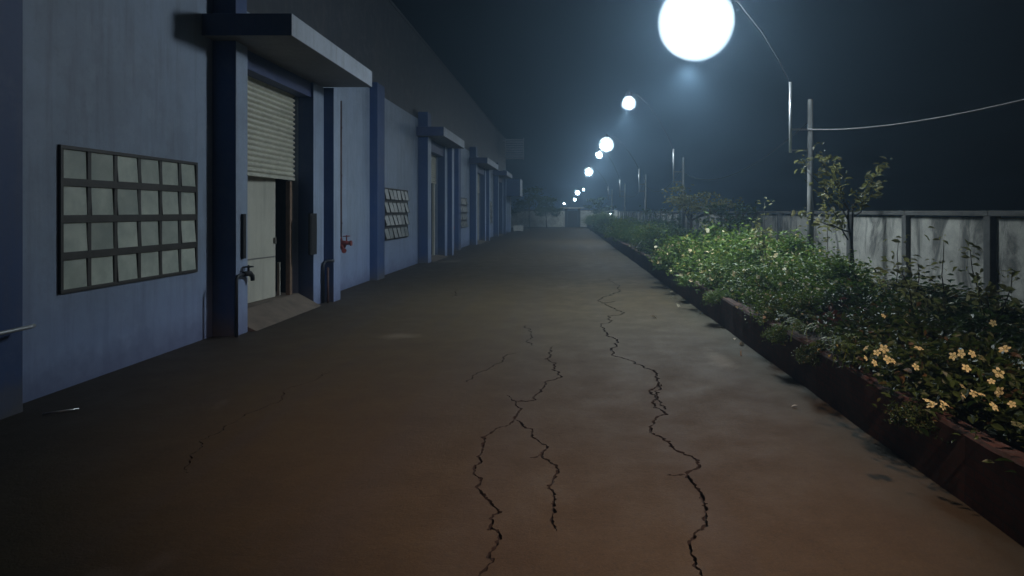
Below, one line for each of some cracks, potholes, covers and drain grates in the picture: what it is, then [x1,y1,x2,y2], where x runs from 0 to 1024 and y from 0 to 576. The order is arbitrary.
crack [597,278,708,576]
crack [466,326,563,576]
crack [184,372,329,473]
